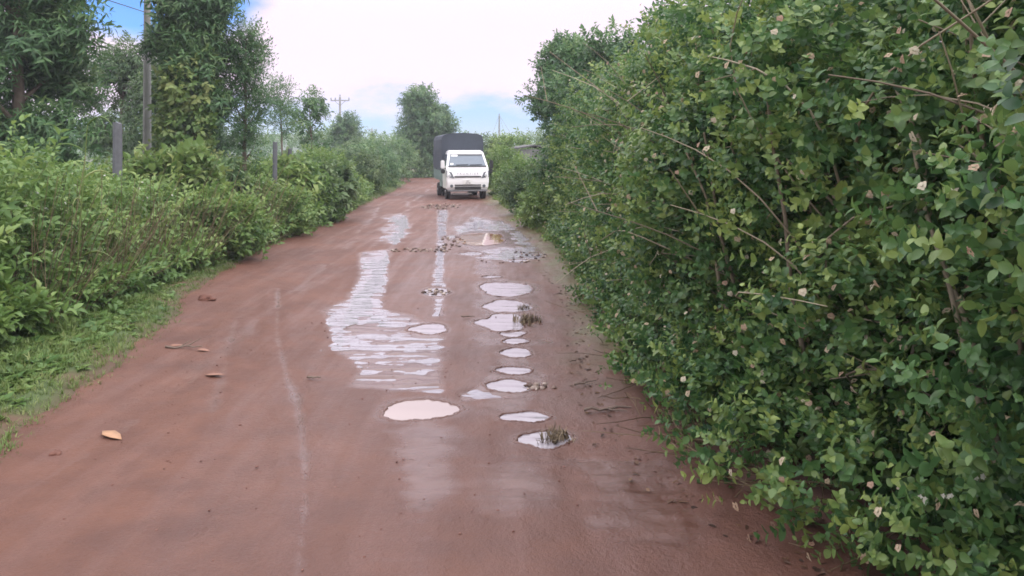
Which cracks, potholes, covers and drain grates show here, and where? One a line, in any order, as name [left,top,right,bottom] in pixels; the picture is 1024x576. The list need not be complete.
pothole [378,397,466,422]
pothole [471,311,526,333]
pothole [477,281,535,298]
pothole [481,377,535,393]
pothole [495,409,553,423]
pothole [501,337,531,345]
pothole [454,232,506,246]
pothole [493,366,534,375]
pothole [497,346,533,358]
pothole [513,429,575,450]
pothole [479,299,534,314]
pothole [404,322,449,335]
